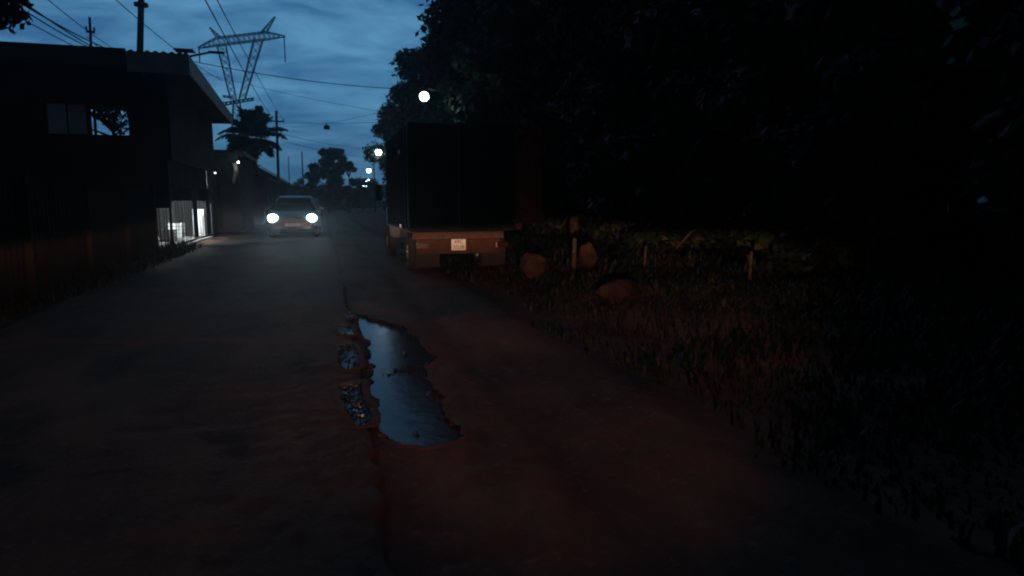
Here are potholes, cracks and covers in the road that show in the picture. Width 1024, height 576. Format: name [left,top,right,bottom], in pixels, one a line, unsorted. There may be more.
pothole [351,313,472,450]
pothole [332,324,359,336]
pothole [331,342,367,372]
pothole [330,379,381,429]
pothole [339,311,359,321]
